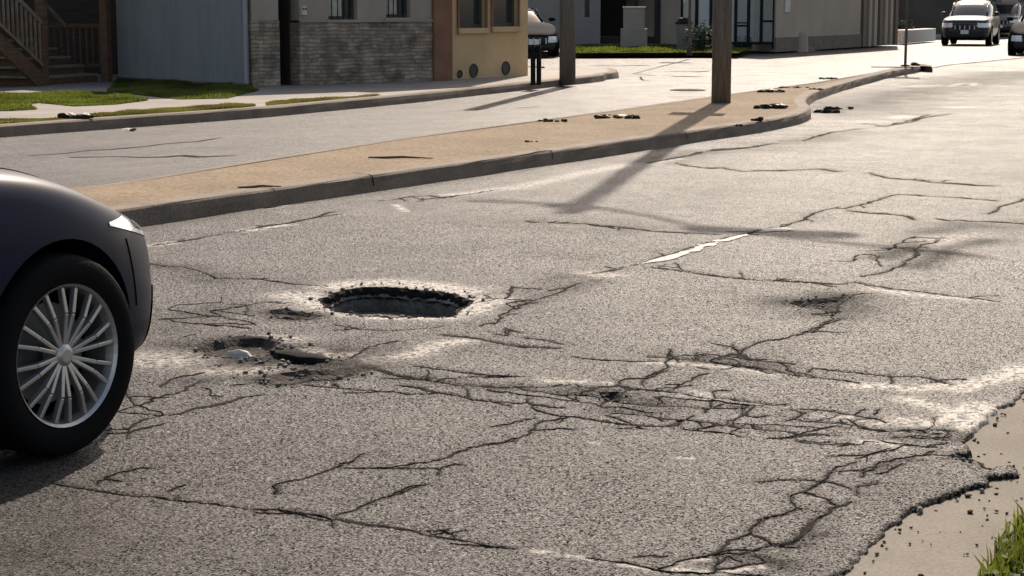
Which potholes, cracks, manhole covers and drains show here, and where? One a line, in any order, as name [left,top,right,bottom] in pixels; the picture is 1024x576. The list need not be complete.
crack [55,129,1024,576]
pothole [318,287,474,318]
pothole [193,336,284,359]
pothole [269,370,353,385]
pothole [790,294,849,312]
